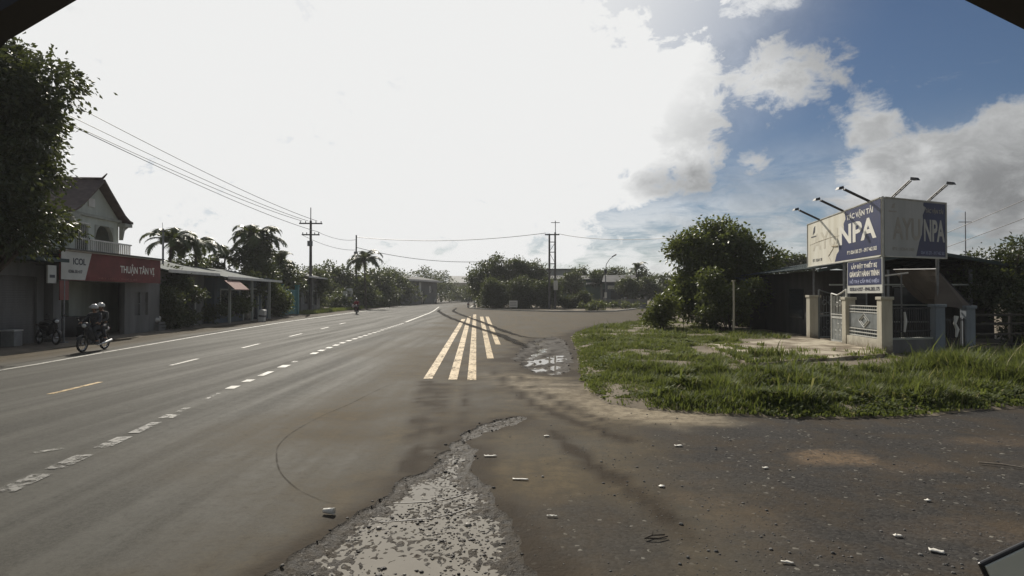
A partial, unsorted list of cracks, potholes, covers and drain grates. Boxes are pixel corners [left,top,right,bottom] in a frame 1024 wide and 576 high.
pothole [264,416,538,576]
pothole [509,337,575,375]
